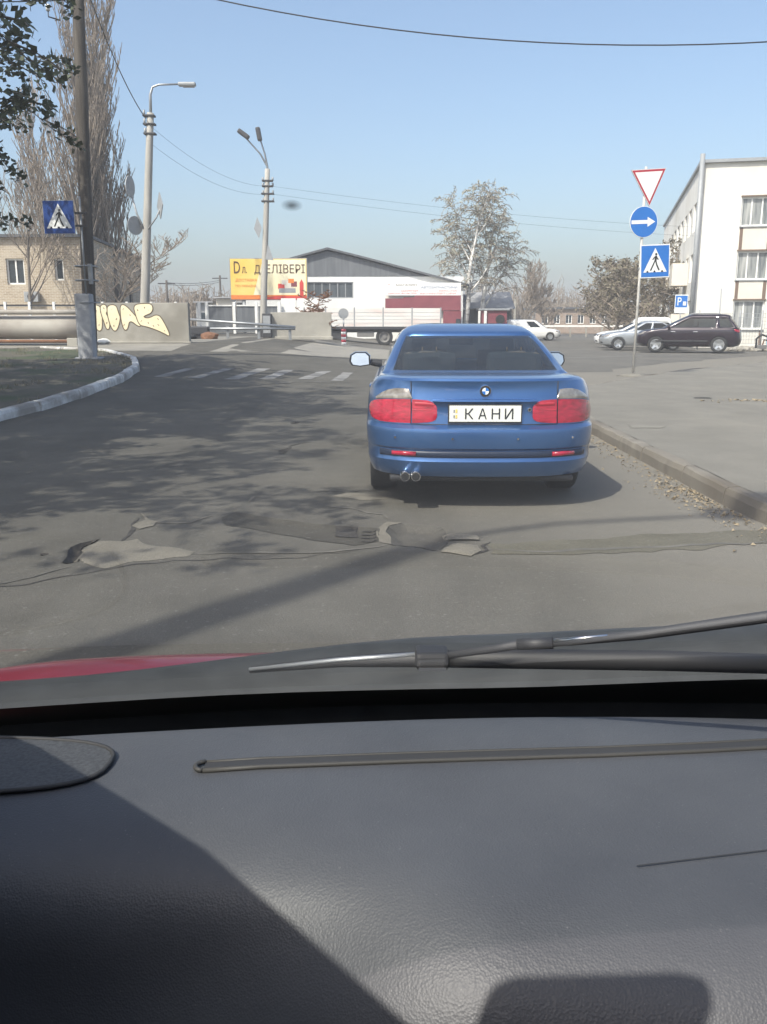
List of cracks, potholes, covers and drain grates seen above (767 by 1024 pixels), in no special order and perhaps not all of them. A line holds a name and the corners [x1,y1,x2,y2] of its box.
pothole [63,538,101,564]
